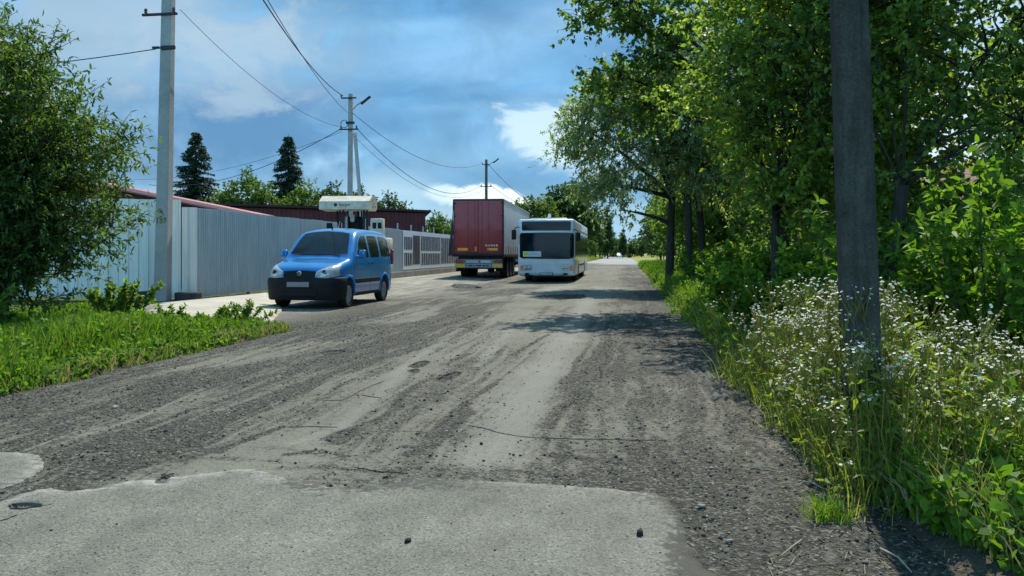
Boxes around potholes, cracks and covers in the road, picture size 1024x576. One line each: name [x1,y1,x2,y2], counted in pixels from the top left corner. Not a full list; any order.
crack [468,425,666,441]
crack [324,381,384,401]
